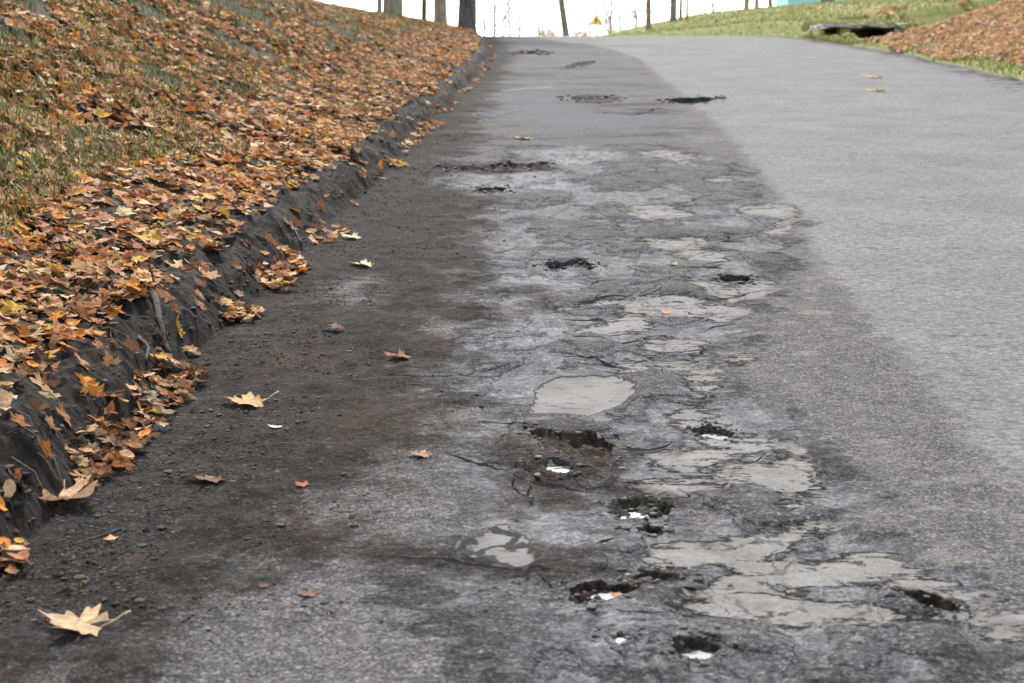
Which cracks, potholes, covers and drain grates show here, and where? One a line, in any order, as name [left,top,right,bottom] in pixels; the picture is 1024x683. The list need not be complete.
pothole [691,425,735,440]
pothole [638,524,665,535]
crack [693,260,728,269]
pothole [606,496,675,519]
pothole [564,61,596,69]
crack [620,442,673,451]
pothole [545,258,598,271]
pothole [539,457,577,473]
crack [702,592,822,602]
pothole [432,162,548,172]
pothole [719,274,750,282]
